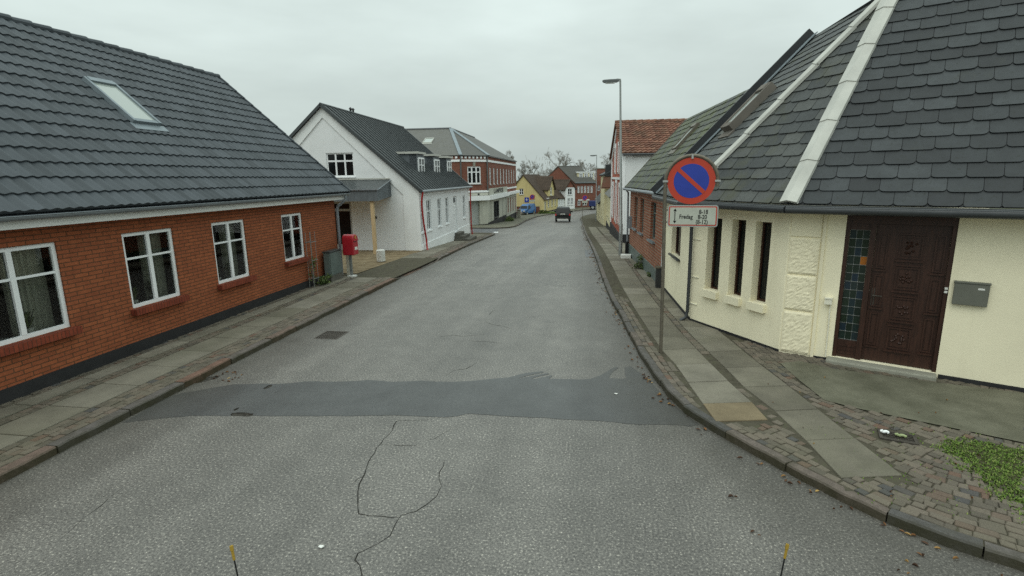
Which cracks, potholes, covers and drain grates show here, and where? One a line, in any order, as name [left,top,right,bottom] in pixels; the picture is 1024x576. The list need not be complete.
drain grate [877,428,920,446]
crack [342,420,444,576]
